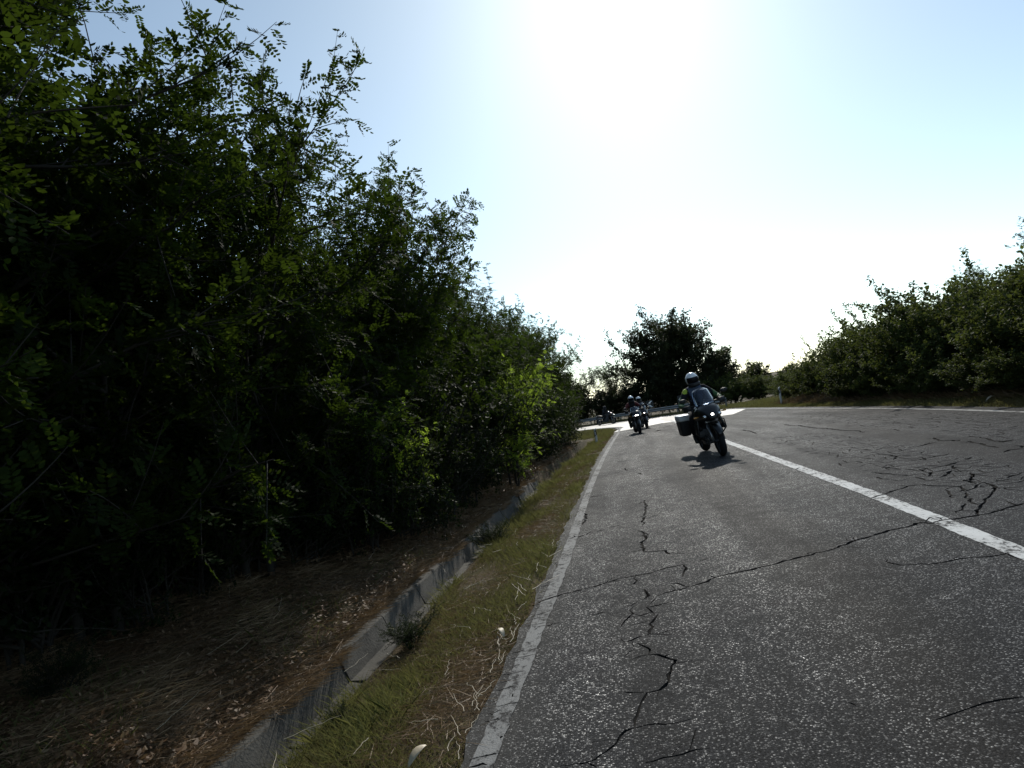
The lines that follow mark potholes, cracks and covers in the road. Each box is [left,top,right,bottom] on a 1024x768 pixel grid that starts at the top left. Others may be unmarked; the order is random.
crack [470,411,1024,768]
